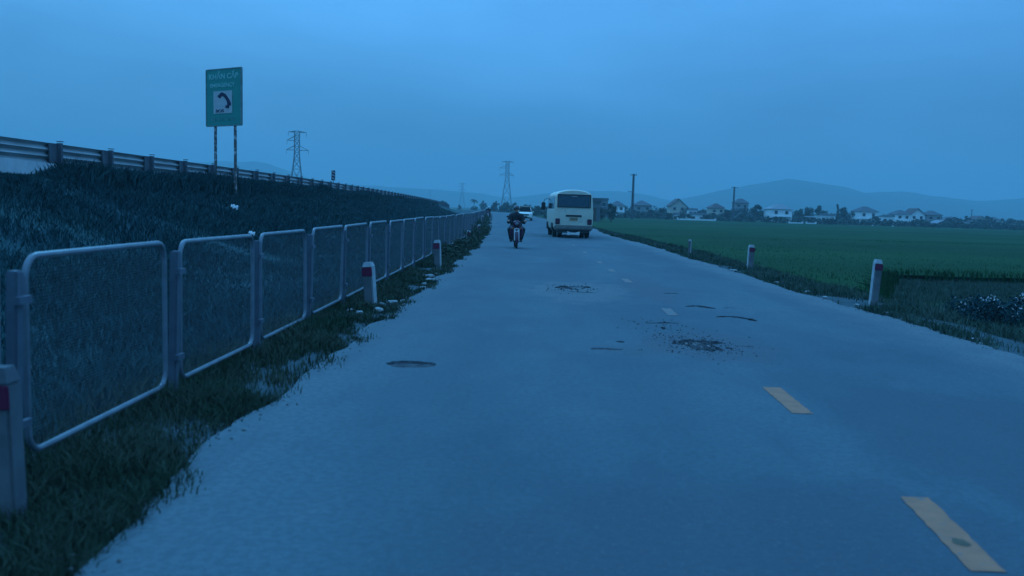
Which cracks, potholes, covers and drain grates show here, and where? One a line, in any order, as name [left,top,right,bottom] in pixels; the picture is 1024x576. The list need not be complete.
pothole [672,339,725,351]
